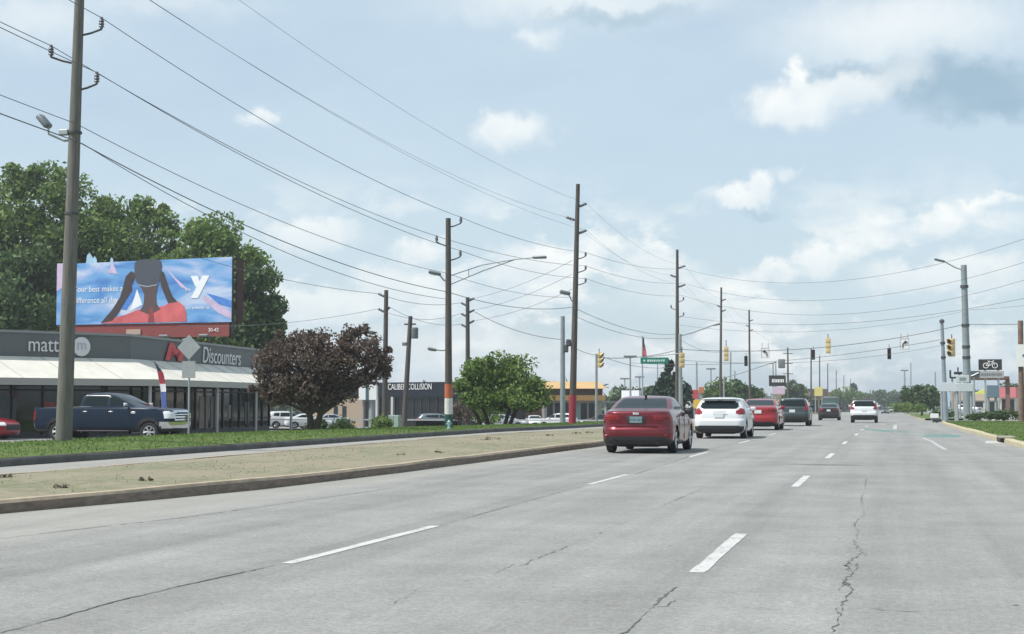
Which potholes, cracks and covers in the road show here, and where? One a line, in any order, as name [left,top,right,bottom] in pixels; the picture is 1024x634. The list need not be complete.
crack [589,586,929,634]
crack [832,479,867,632]
crack [394,490,699,603]
